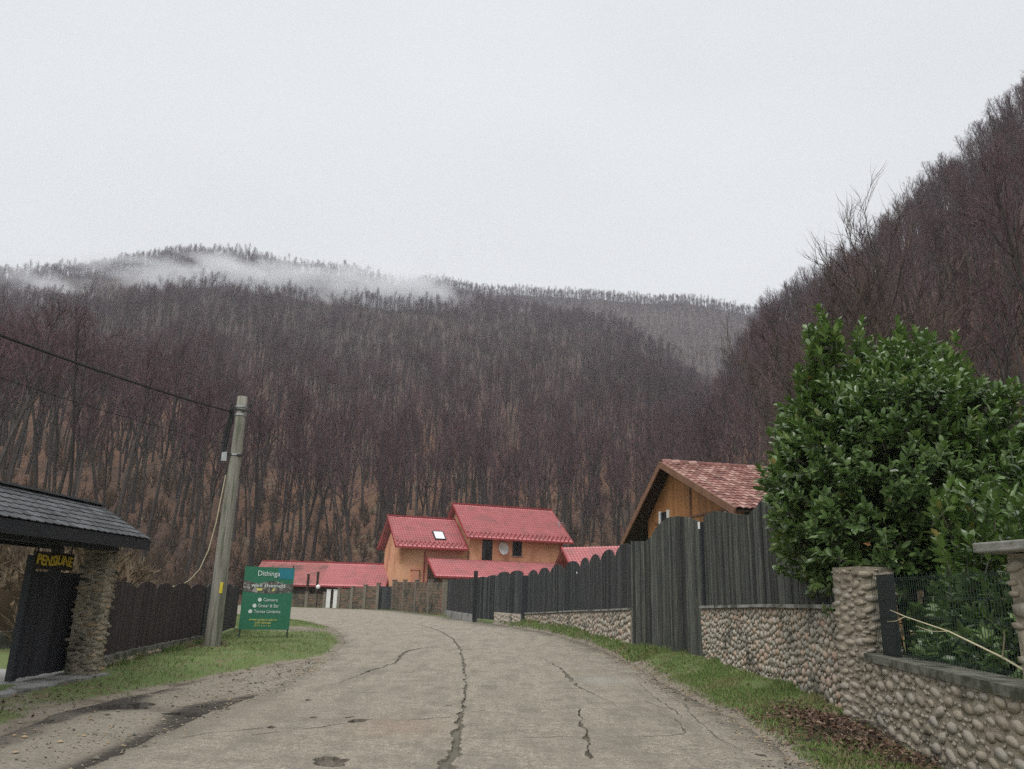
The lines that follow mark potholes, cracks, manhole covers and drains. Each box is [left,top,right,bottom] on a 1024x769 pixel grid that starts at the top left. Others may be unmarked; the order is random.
pothole [312,756,350,767]
crack [182,620,743,769]
